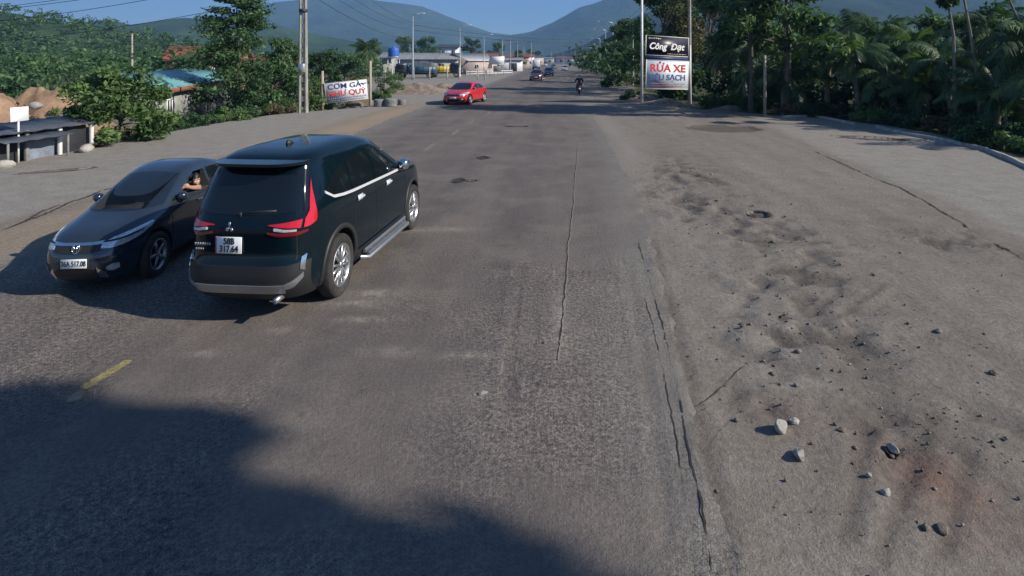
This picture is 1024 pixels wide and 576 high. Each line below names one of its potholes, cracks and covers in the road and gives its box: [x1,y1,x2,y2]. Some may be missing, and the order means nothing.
crack [638,240,712,571]
crack [557,145,578,359]
pothole [745,209,771,218]
